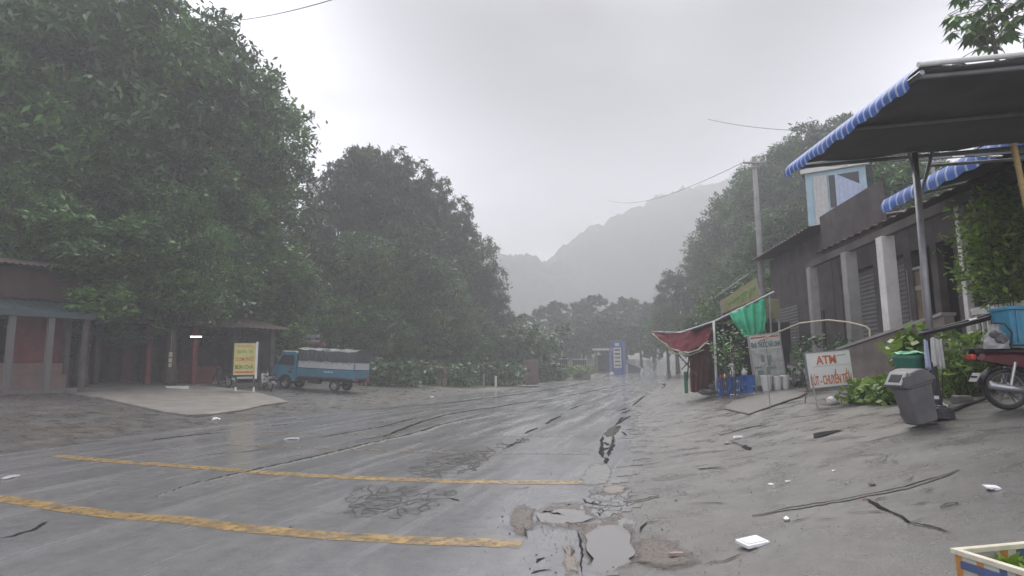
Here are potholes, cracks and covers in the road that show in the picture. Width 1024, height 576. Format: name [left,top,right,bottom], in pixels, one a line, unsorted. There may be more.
crack [598,378,680,463]
crack [2,521,48,538]
crack [567,485,659,572]
pothole [538,503,595,529]
pothole [580,517,635,559]
crack [680,395,959,533]
